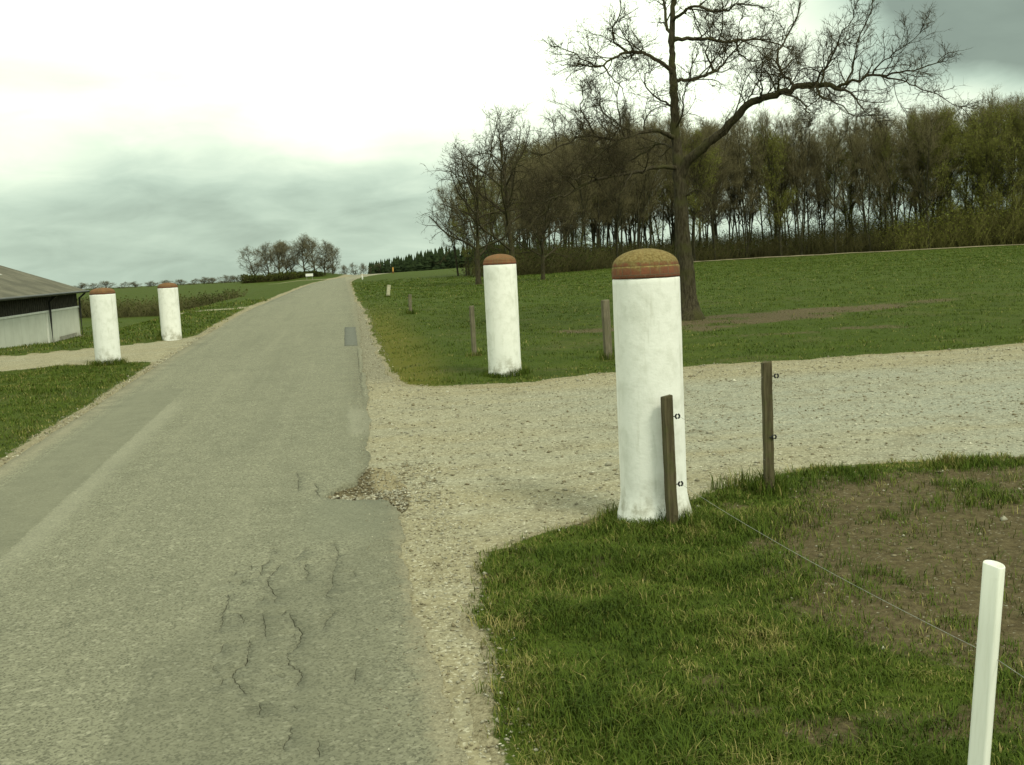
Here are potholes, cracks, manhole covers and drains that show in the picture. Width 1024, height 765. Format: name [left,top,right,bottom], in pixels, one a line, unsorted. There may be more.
pothole [328,467,412,514]
crack [212,547,356,756]
